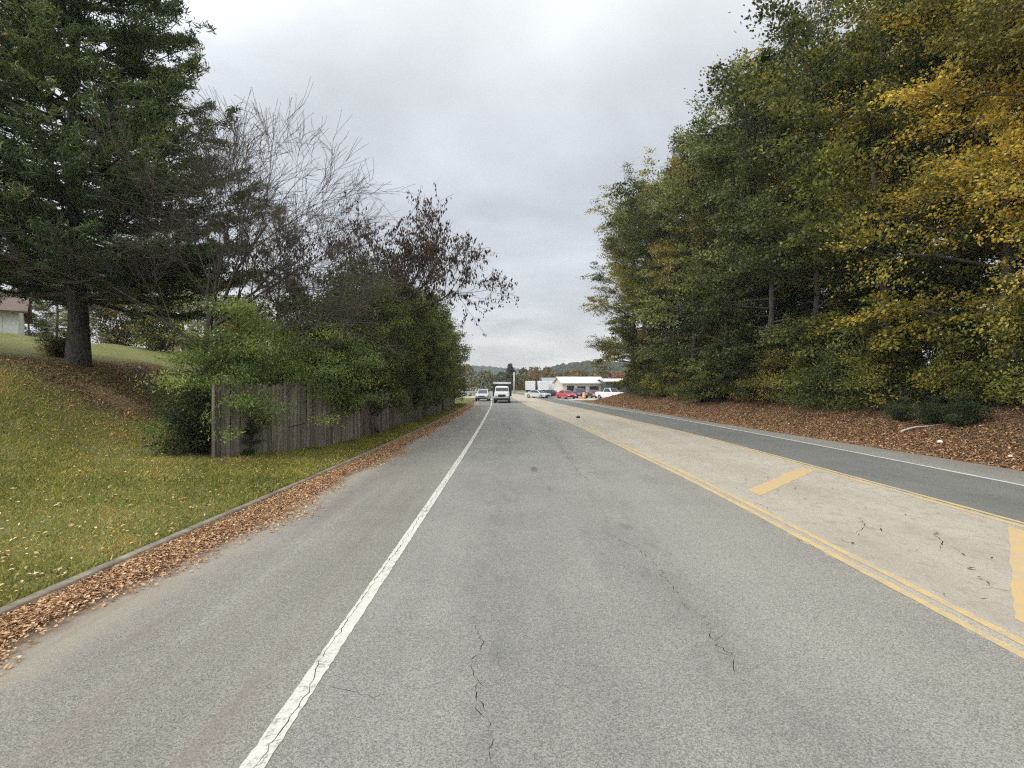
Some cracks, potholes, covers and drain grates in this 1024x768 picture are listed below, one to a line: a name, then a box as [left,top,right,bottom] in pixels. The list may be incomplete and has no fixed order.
crack [471,622,493,760]
crack [607,532,738,674]
